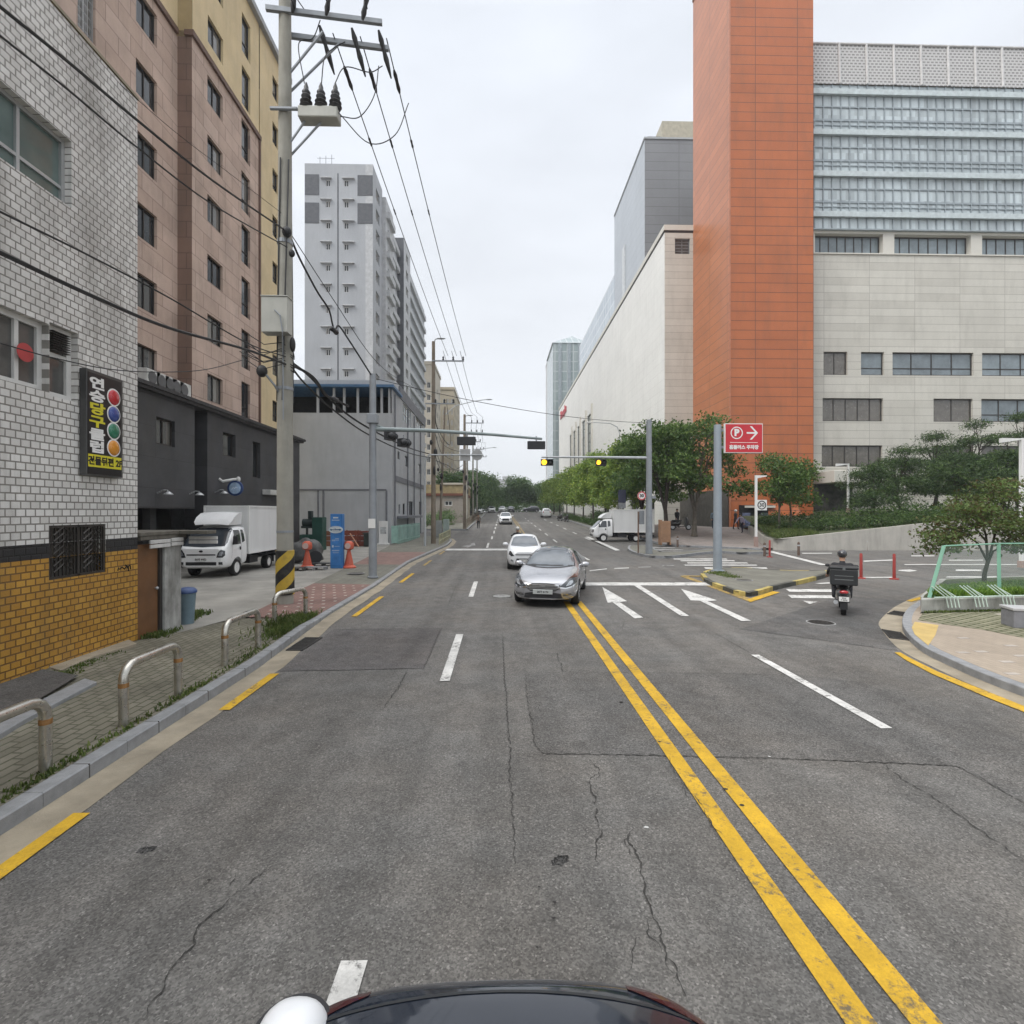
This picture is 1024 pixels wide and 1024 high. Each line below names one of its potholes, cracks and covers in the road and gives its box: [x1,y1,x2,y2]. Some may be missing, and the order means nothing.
crack [502,636,516,869]
crack [144,866,272,1019]
drain grate [286,637,323,651]
pothole [551,855,570,866]
pothole [136,846,157,854]
crack [586,758,607,862]
crack [624,829,687,998]
